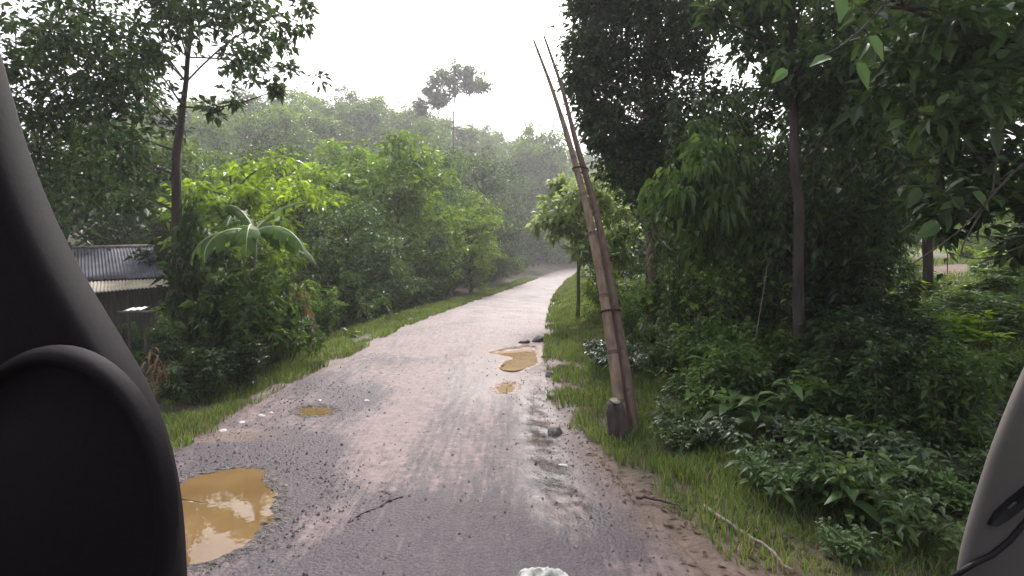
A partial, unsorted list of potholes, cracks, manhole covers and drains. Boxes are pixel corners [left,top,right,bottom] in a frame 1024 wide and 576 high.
pothole [490,380,522,395]
crack [352,491,403,522]
pothole [483,344,543,373]
pothole [179,462,294,575]
pothole [288,403,343,418]
